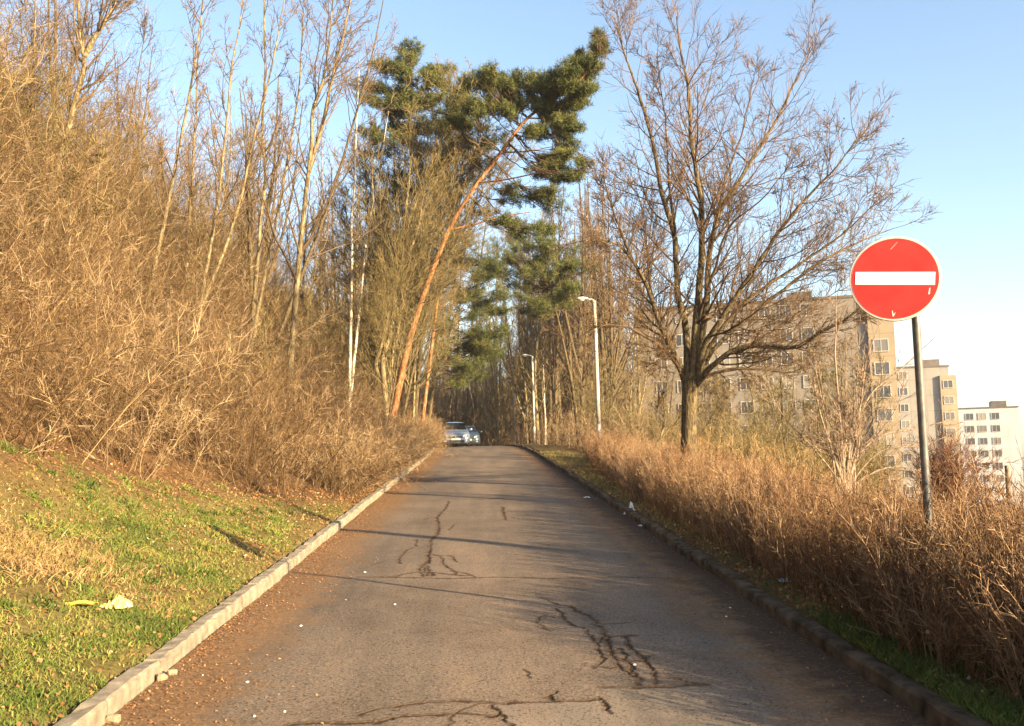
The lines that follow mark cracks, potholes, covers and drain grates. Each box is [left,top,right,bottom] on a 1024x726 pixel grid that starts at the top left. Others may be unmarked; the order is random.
crack [287,692,609,726]
crack [381,504,629,579]
crack [536,602,707,689]
